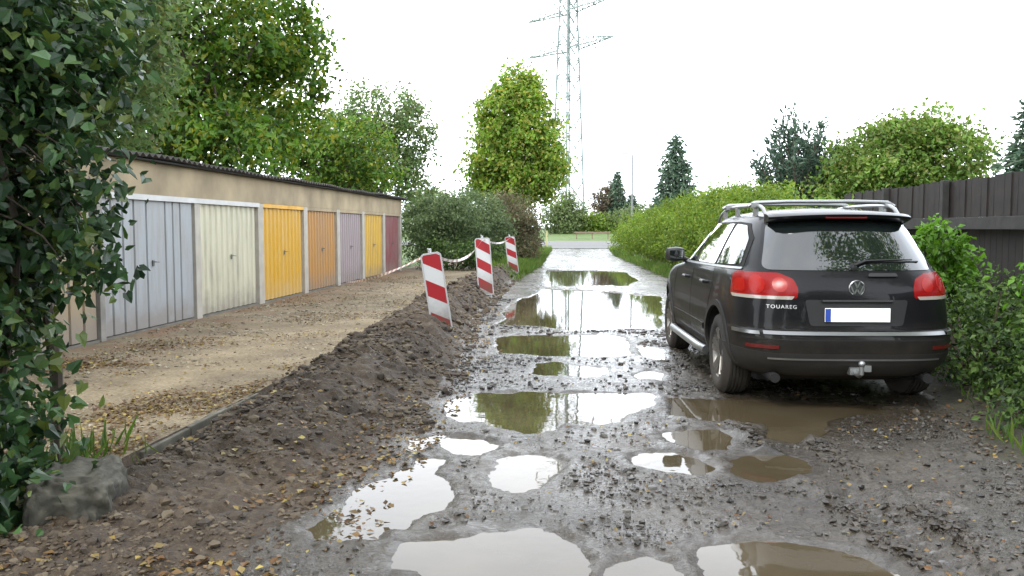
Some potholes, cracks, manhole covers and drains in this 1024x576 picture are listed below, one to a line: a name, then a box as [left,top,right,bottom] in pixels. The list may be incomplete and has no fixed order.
pothole [466,447,584,498]
pothole [655,394,899,446]
pothole [610,444,726,479]
pothole [279,452,477,548]
pothole [365,519,608,576]
pothole [433,430,521,460]
pothole [540,269,643,287]
pothole [485,332,639,358]
pothole [665,527,936,576]
pothole [644,424,750,454]
pothole [488,288,667,332]
pothole [426,387,667,436]
